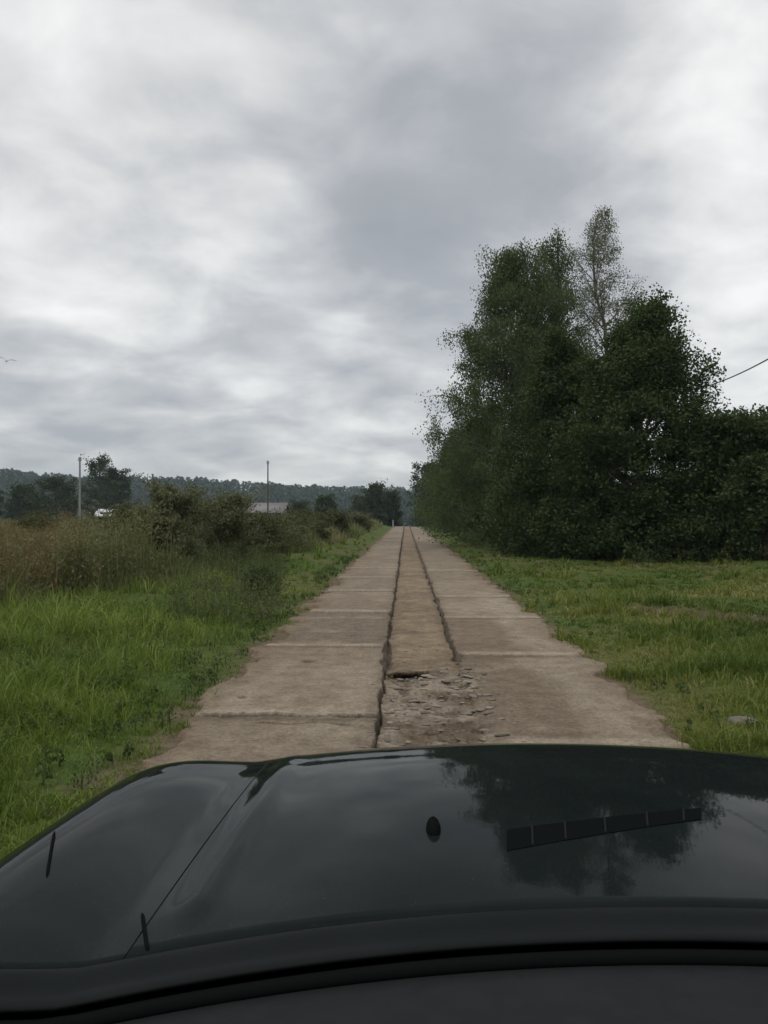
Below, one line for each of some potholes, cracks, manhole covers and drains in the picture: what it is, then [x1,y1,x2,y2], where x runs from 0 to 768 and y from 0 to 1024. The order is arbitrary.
crack [205,527,463,748]
pothole [377,668,520,748]
